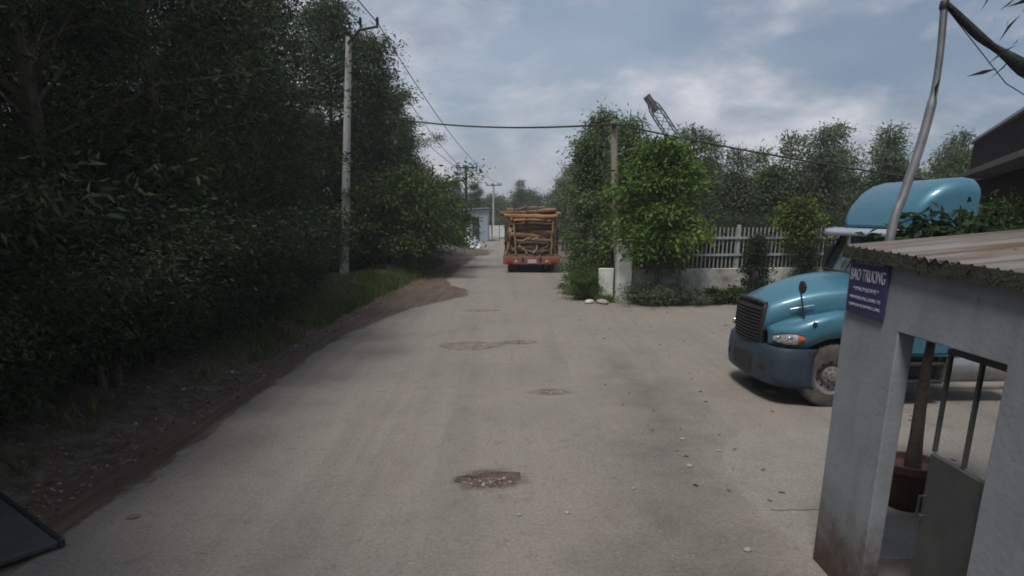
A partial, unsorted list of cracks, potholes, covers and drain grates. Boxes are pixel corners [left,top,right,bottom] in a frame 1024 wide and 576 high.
pothole [443,342,500,350]
pothole [454,472,521,488]
